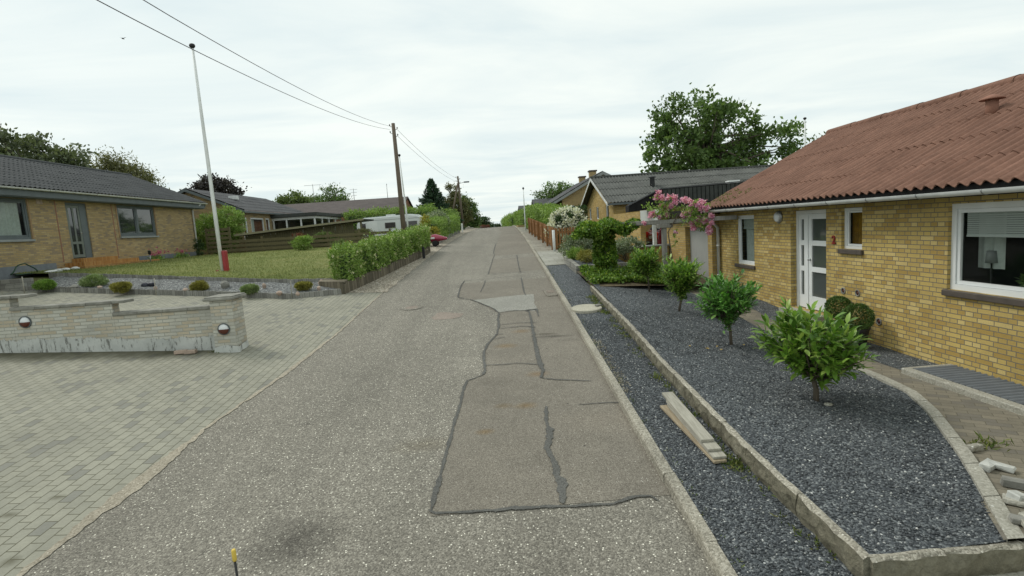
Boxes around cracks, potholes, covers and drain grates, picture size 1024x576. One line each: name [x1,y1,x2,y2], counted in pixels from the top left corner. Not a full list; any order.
manhole cover [571,304,602,314]
